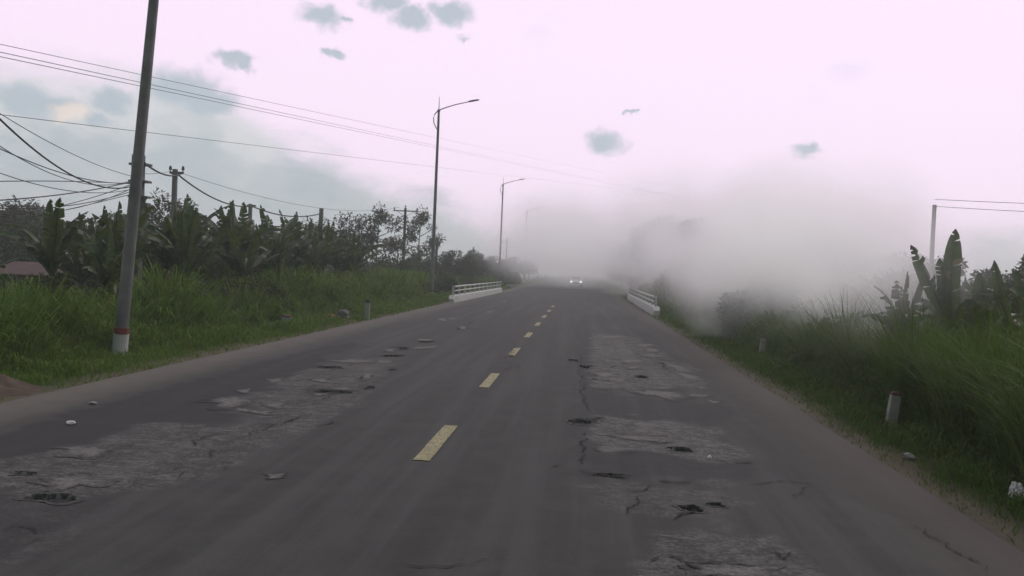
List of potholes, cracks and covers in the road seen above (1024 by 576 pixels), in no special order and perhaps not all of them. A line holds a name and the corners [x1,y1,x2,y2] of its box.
crack [913,525,988,571]
pothole [672,503,709,514]
pothole [13,492,85,506]
